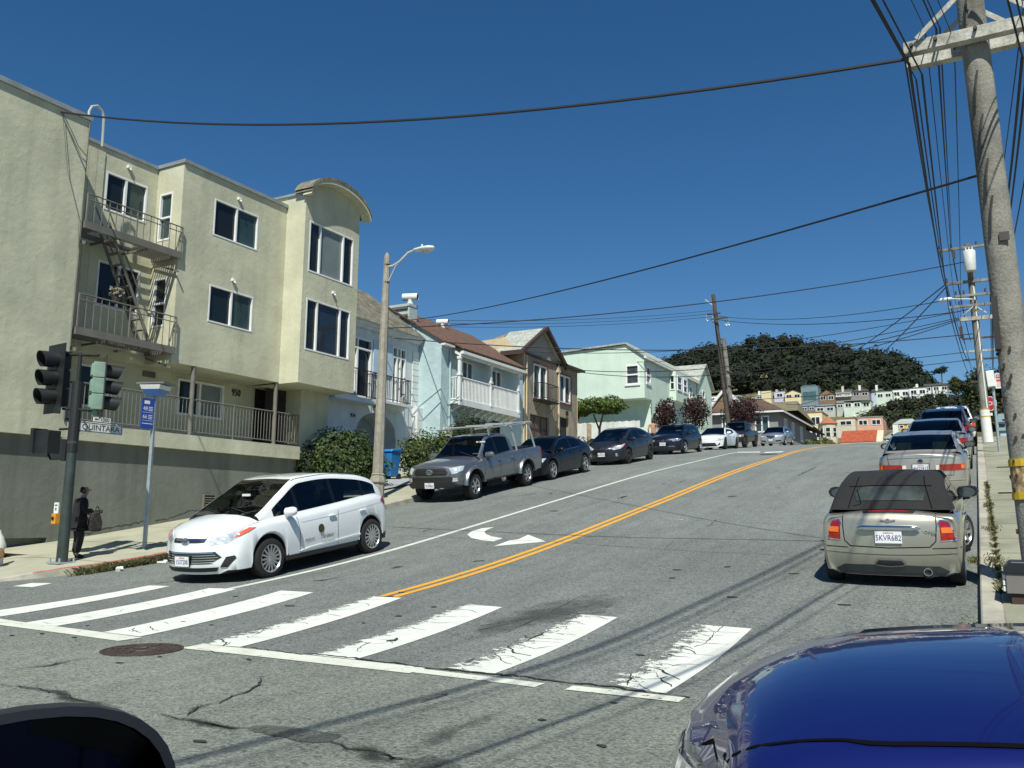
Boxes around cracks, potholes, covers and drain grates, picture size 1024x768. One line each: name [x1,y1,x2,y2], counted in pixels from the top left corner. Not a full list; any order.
crack [2,657,119,707]
crack [626,625,739,686]
manhole cover [99,643,184,657]
crack [330,741,411,762]
crack [163,677,262,728]
crack [494,628,574,664]
